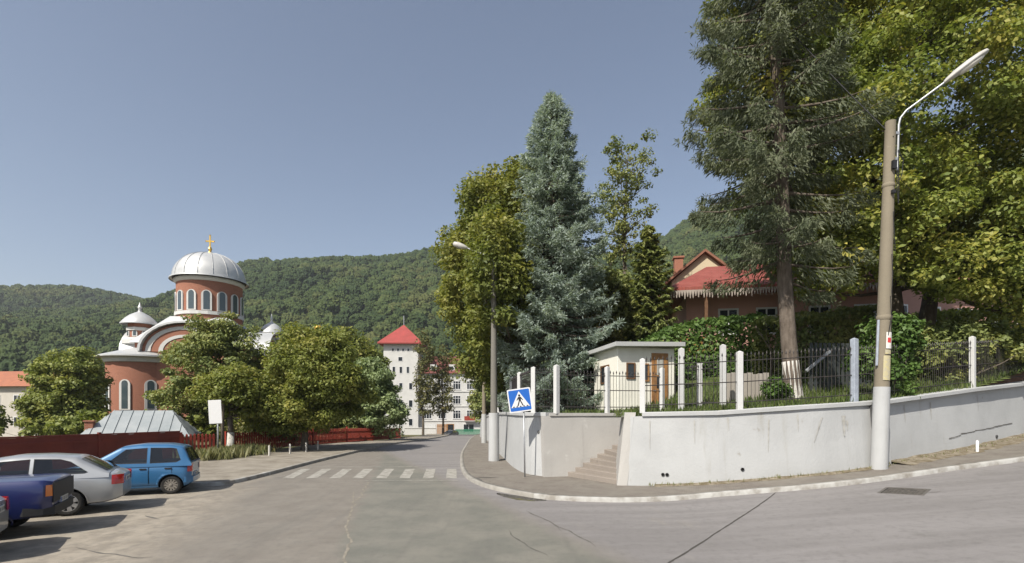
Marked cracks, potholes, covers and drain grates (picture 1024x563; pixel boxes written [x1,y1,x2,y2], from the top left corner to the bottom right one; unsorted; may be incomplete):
crack [668,492,776,563]
